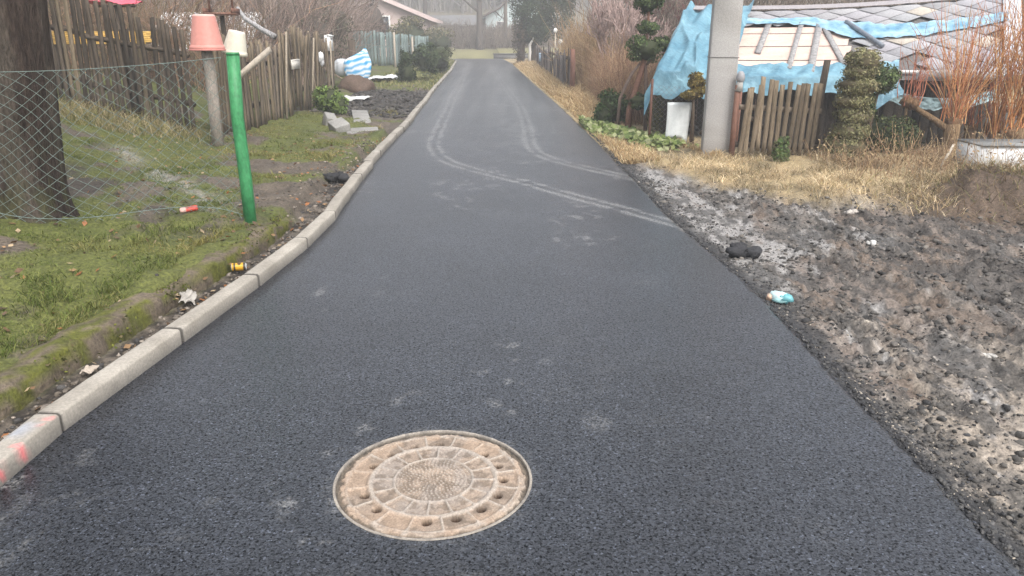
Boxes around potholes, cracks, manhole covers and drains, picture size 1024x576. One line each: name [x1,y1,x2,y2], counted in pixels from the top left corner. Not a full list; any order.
manhole cover [332,430,532,541]
